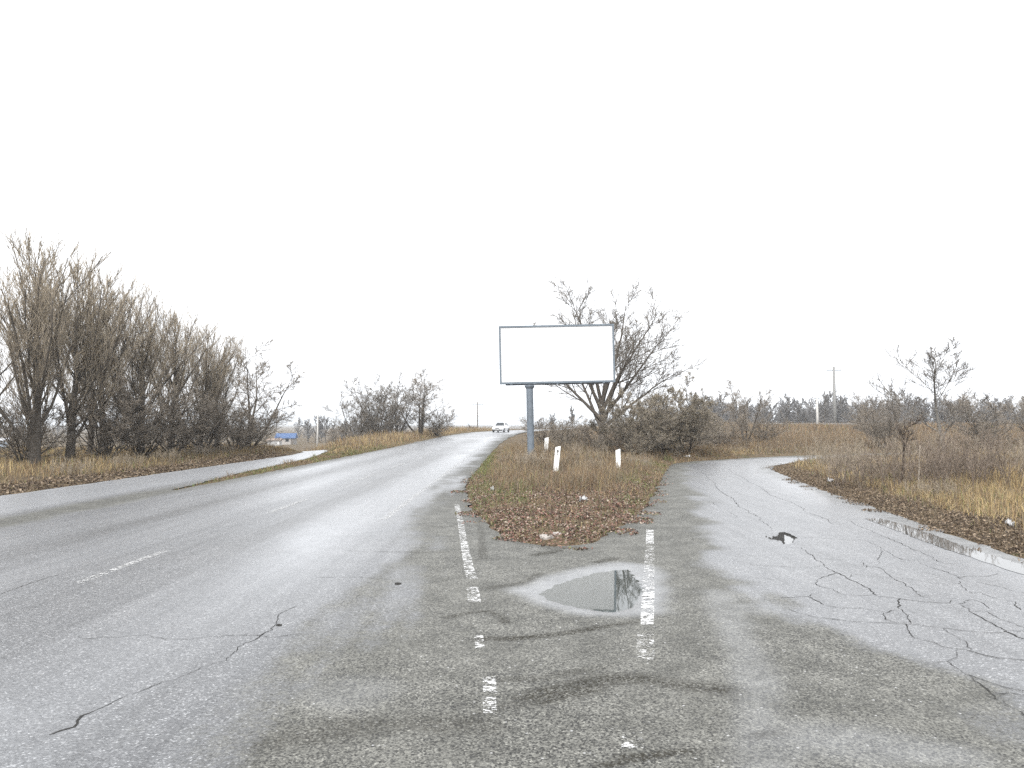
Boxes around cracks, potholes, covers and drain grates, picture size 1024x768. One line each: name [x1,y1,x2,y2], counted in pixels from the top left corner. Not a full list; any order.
pothole [765,532,797,544]
crack [708,473,1024,715]
crack [49,607,293,735]
